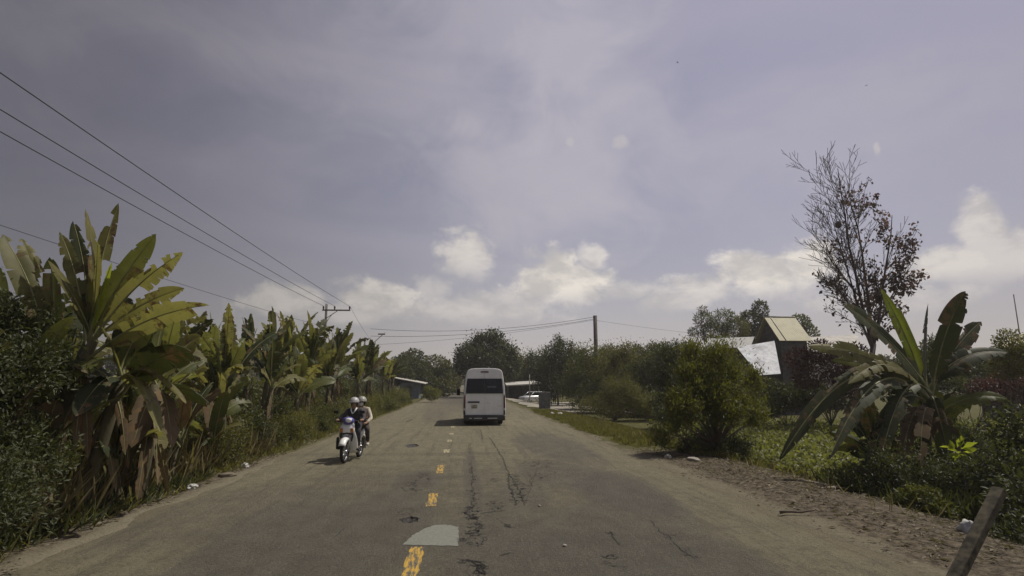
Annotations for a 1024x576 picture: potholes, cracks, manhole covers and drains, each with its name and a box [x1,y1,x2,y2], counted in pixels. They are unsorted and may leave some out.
crack [480,429,562,527]
crack [650,520,698,559]
crack [600,532,628,567]
